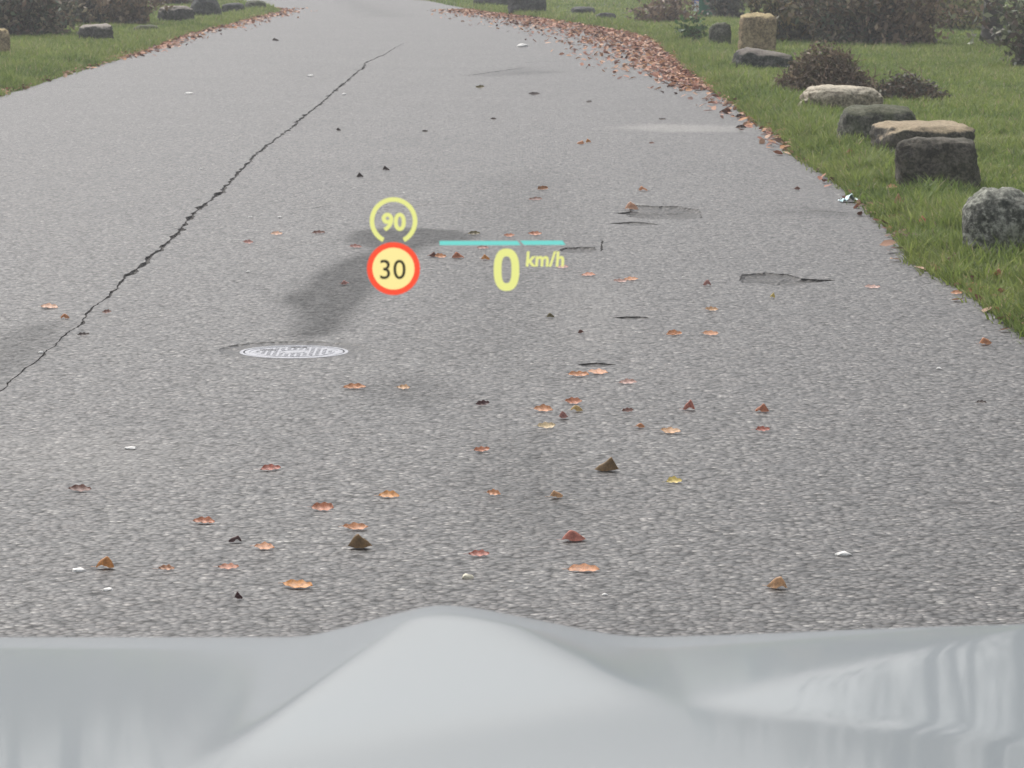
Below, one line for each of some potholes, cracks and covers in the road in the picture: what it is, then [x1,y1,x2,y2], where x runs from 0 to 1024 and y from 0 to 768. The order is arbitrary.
pothole [618,205,703,219]
crack [0,43,417,391]
pothole [739,272,835,286]
manhole cover [219,341,370,359]
